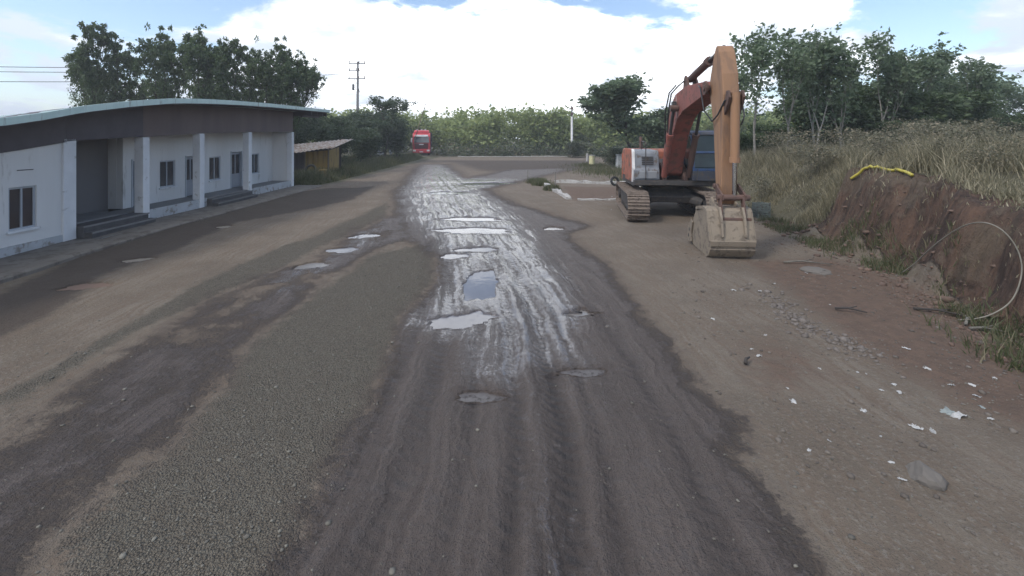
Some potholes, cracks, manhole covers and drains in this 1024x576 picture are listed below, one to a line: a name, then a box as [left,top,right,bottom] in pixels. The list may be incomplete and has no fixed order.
pothole [289,261,334,270]
pothole [454,390,512,404]
pothole [424,309,502,331]
pothole [461,269,501,303]
pothole [323,246,361,254]
pothole [554,368,609,378]
pothole [49,281,121,292]
pothole [562,308,604,317]
